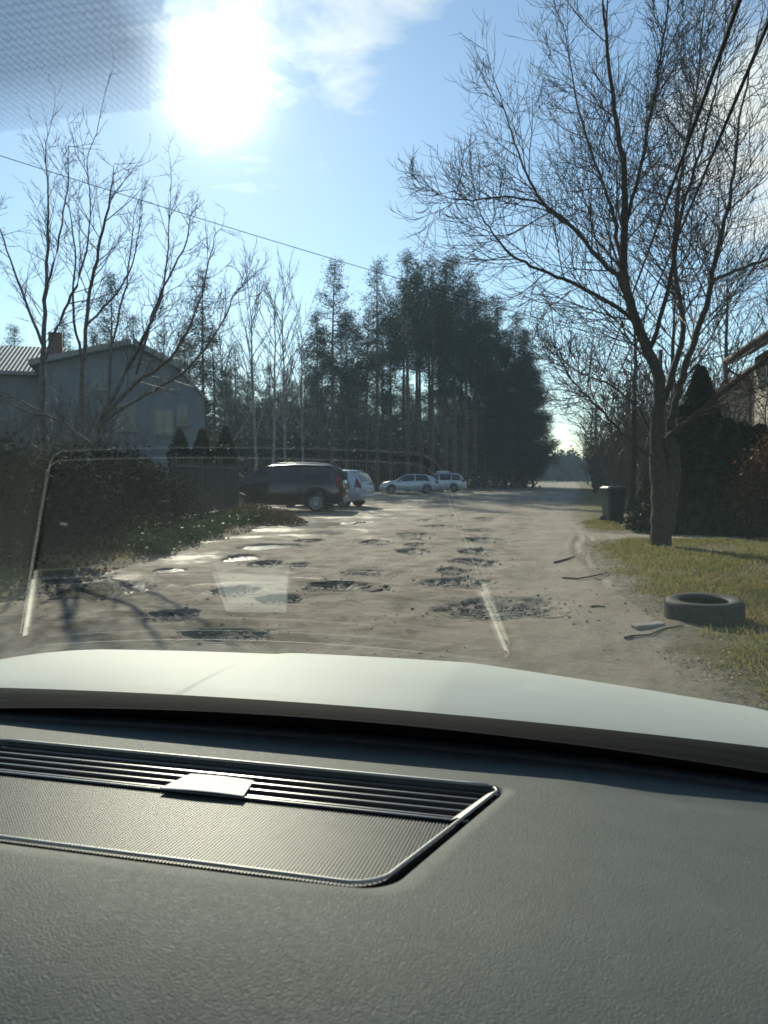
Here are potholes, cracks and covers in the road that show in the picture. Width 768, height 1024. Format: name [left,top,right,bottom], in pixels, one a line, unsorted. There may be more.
pothole [392,546,435,556]
pothole [442,557,513,568]
pothole [146,567,192,575]
pothole [238,558,288,568]
pothole [429,565,476,577]
pothole [453,547,506,556]
pothole [203,583,269,599]
pothole [248,593,309,605]
pothole [334,569,397,577]
pothole [166,623,289,644]
pothole [393,531,442,541]
